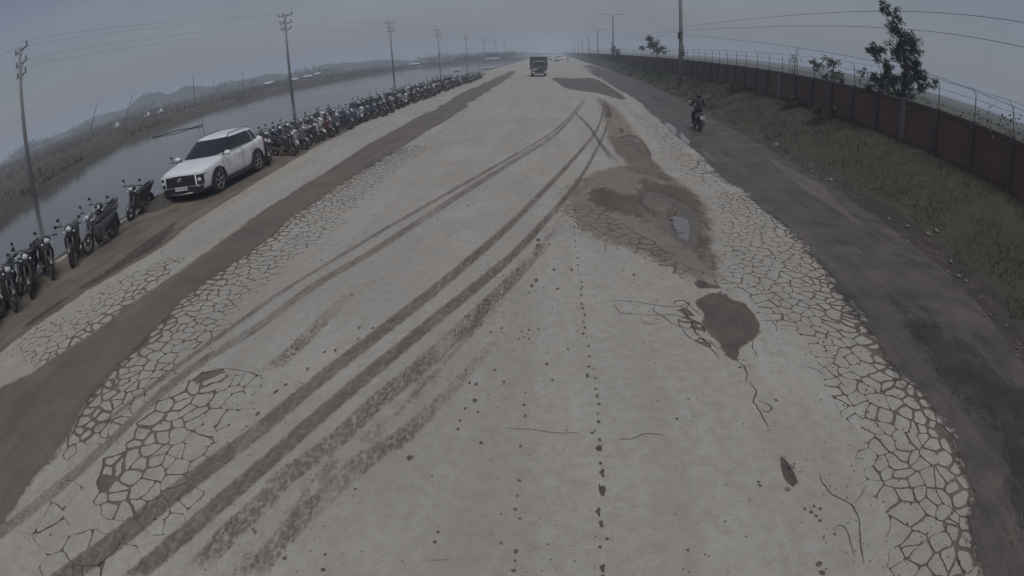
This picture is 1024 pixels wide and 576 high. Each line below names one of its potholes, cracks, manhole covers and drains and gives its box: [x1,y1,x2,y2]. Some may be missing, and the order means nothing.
crack [9,145,435,576]
pothole [780,456,798,486]
pothole [590,178,719,270]
pothole [696,293,761,360]
crack [555,111,987,576]
